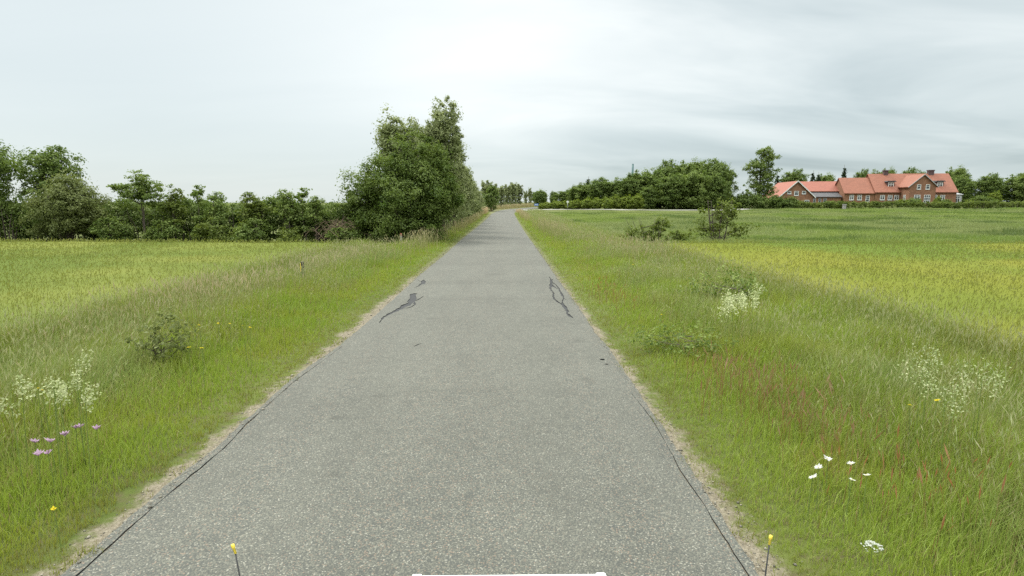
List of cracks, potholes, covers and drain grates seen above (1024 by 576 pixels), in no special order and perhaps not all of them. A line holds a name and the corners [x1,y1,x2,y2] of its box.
crack [379,280,436,323]
crack [549,277,573,318]
